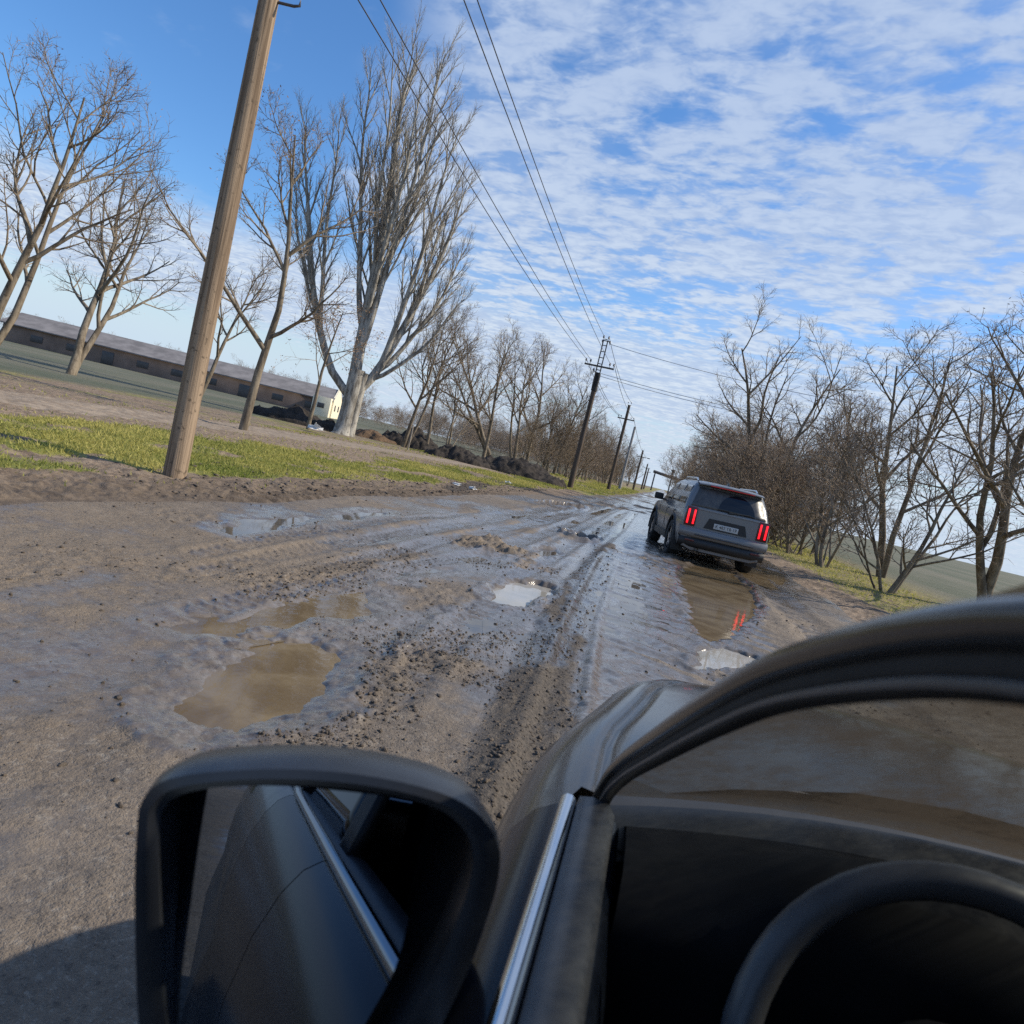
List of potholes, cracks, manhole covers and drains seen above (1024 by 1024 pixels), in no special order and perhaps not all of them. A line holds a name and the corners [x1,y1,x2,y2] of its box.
pothole [476,577,562,609]
pothole [688,641,762,673]
pothole [130,628,369,751]
pothole [672,559,768,647]
